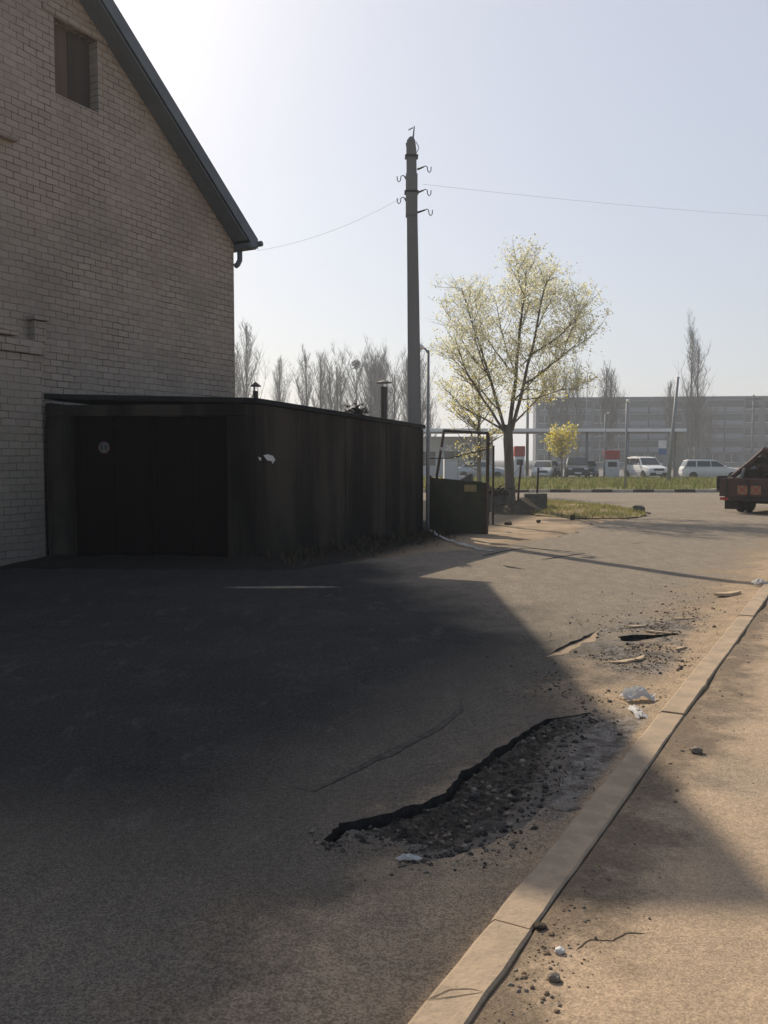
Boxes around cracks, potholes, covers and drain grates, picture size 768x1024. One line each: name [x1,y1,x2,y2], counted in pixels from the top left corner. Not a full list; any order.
crack [576,932,650,950]
pothole [618,633,679,642]
pothole [324,712,599,863]
